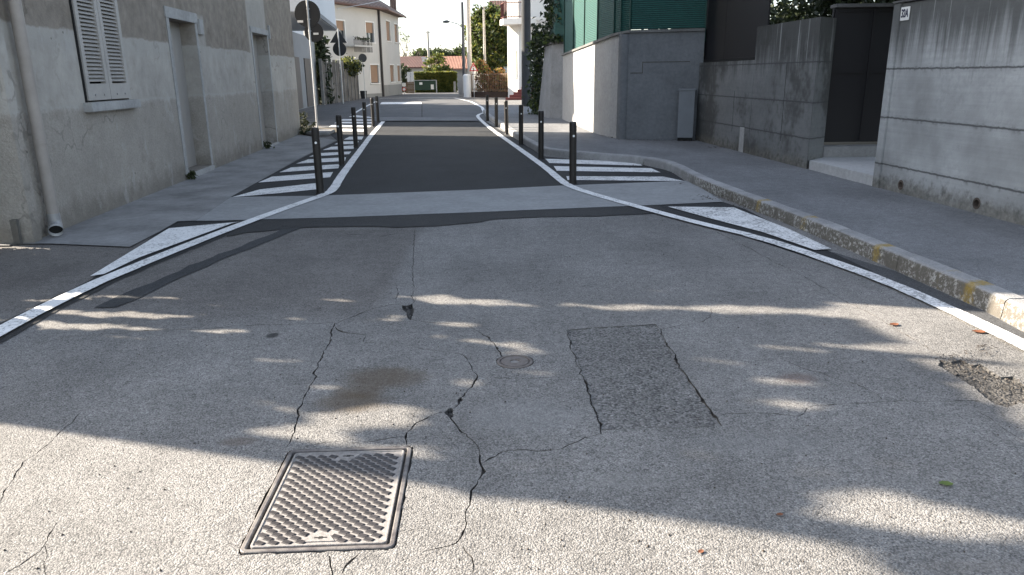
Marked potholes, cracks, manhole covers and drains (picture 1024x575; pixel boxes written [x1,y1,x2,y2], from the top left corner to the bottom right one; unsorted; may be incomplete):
pothole [938,359,1024,407]
crack [329,554,359,575]
crack [0,413,80,502]
manhole cover [497,355,533,369]
crack [6,524,56,574]
crack [57,289,1024,571]
